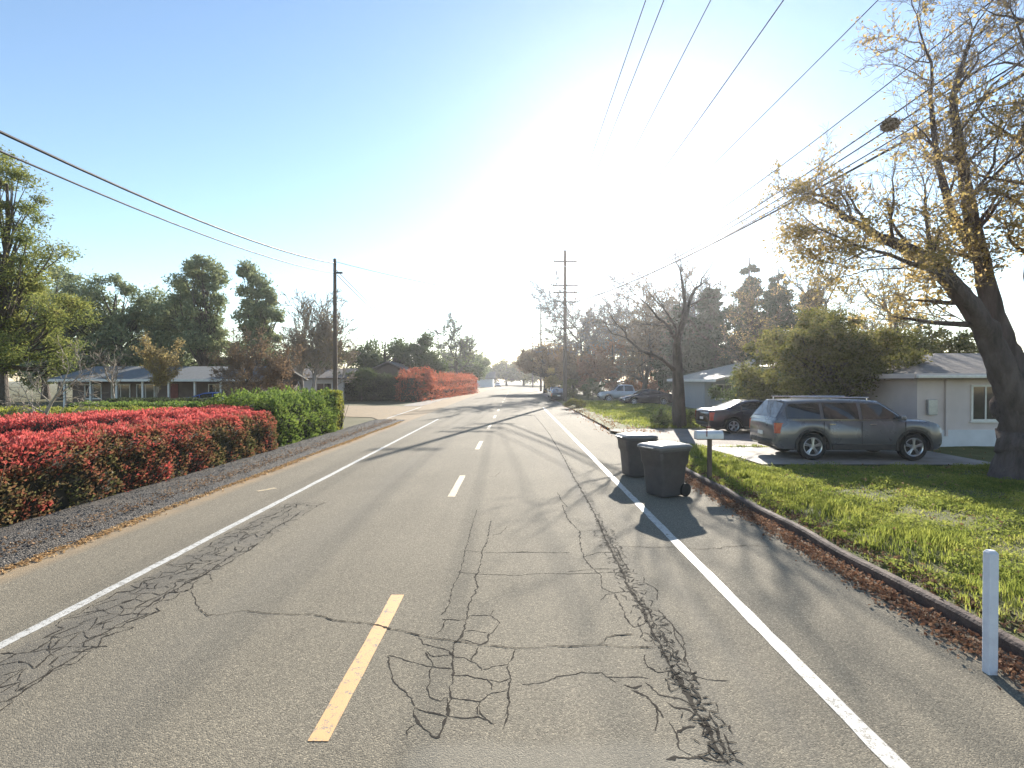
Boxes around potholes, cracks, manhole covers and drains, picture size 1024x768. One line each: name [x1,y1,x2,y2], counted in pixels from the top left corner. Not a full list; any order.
crack [0,418,769,766]
